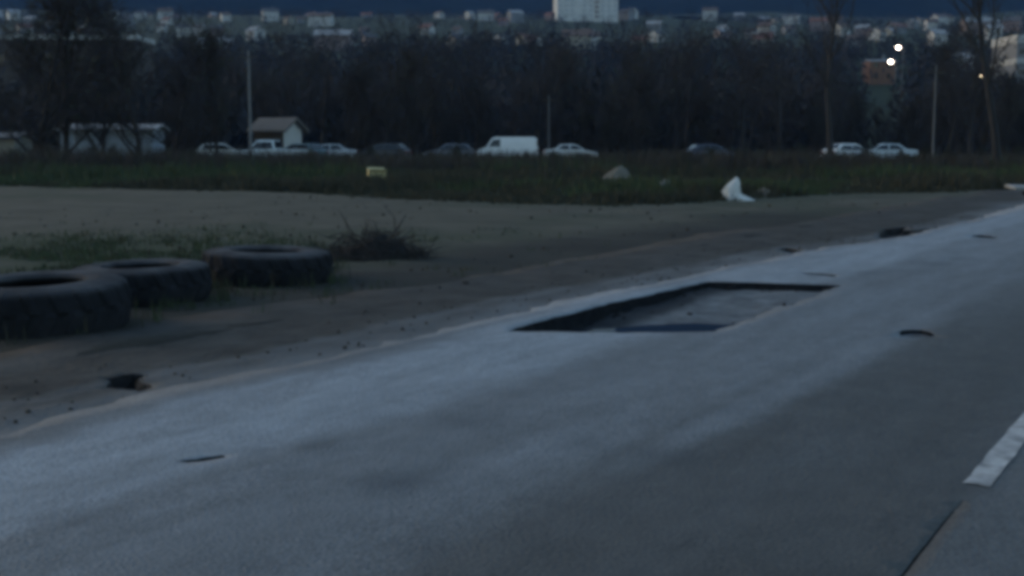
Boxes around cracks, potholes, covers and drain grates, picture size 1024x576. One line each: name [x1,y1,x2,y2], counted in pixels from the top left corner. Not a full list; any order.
pothole [899,330,935,338]
pothole [106,374,153,392]
pothole [879,227,938,239]
pothole [511,282,839,333]
